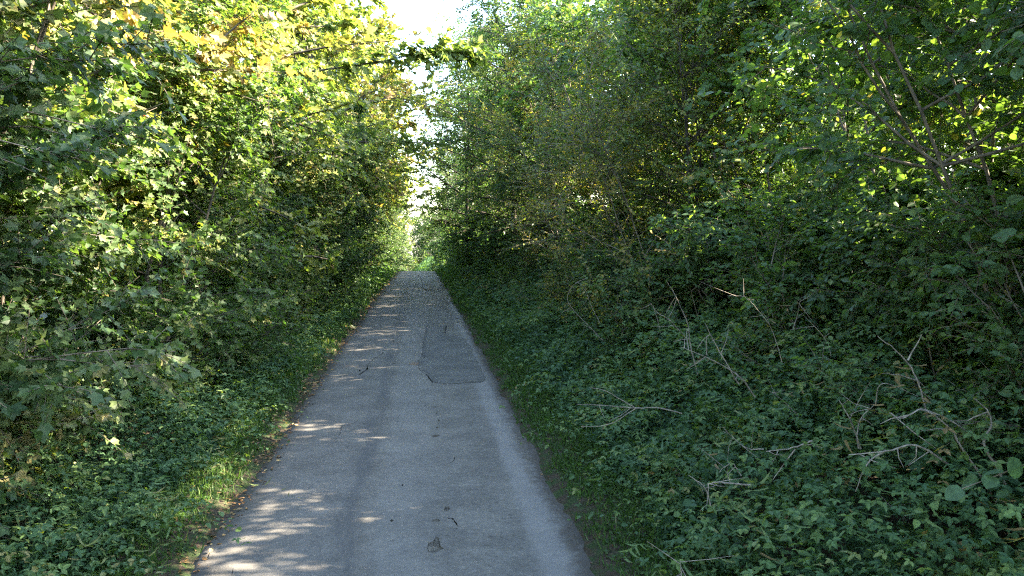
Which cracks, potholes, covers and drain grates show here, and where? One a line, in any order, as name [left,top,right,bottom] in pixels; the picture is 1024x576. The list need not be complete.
pothole [427,536,444,553]
